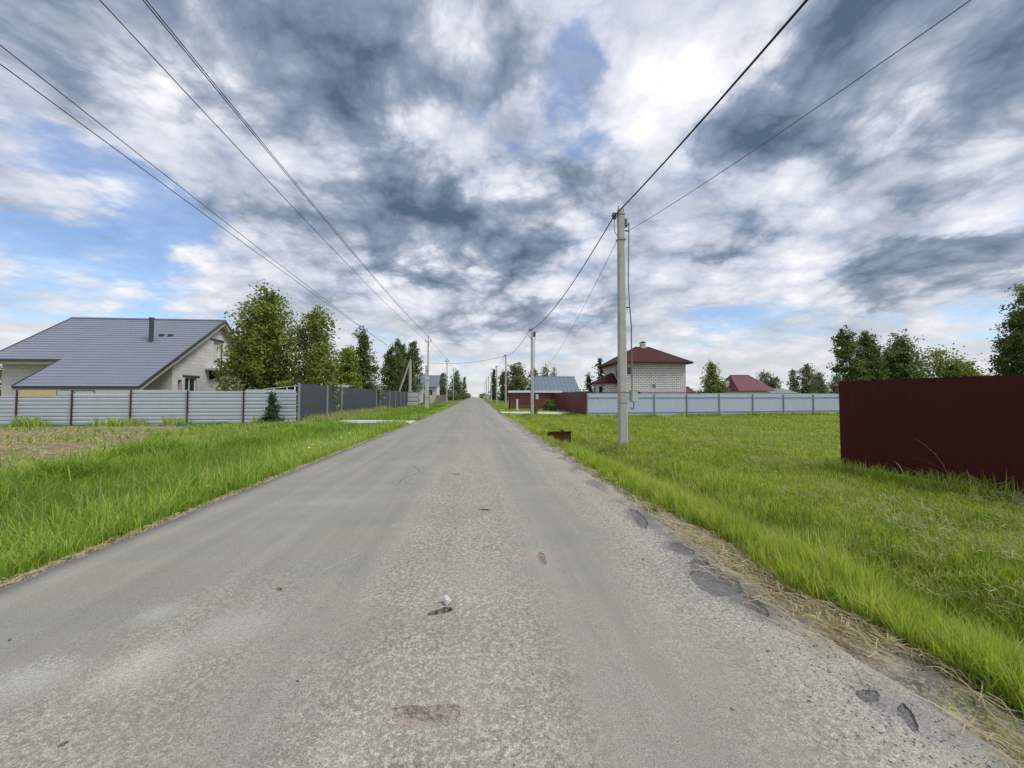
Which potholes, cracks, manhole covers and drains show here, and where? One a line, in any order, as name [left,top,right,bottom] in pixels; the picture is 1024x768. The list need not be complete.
pothole [629,509,648,529]
pothole [855,689,880,703]
pothole [743,596,770,619]
pothole [687,558,743,597]
pothole [897,703,919,732]
